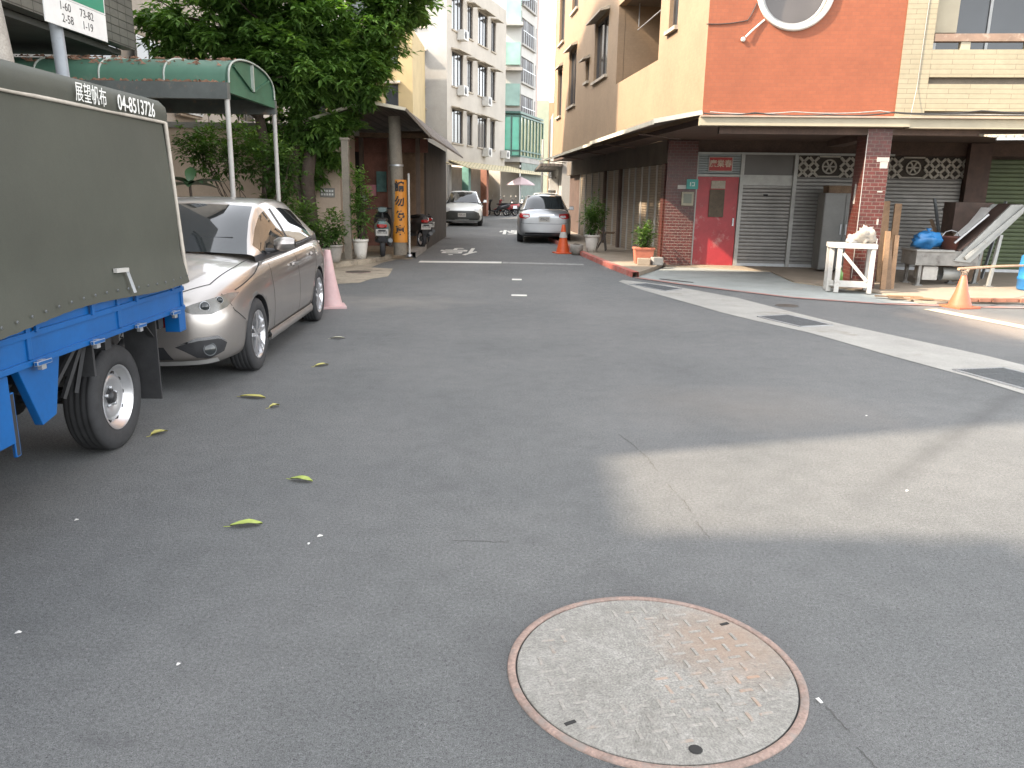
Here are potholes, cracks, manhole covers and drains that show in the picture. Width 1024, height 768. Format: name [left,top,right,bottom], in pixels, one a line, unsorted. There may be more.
crack [620,435,710,539]
drain grate [630,283,682,291]
drain grate [757,314,833,327]
manhole cover [507,596,810,768]
drain grate [952,367,1024,390]
